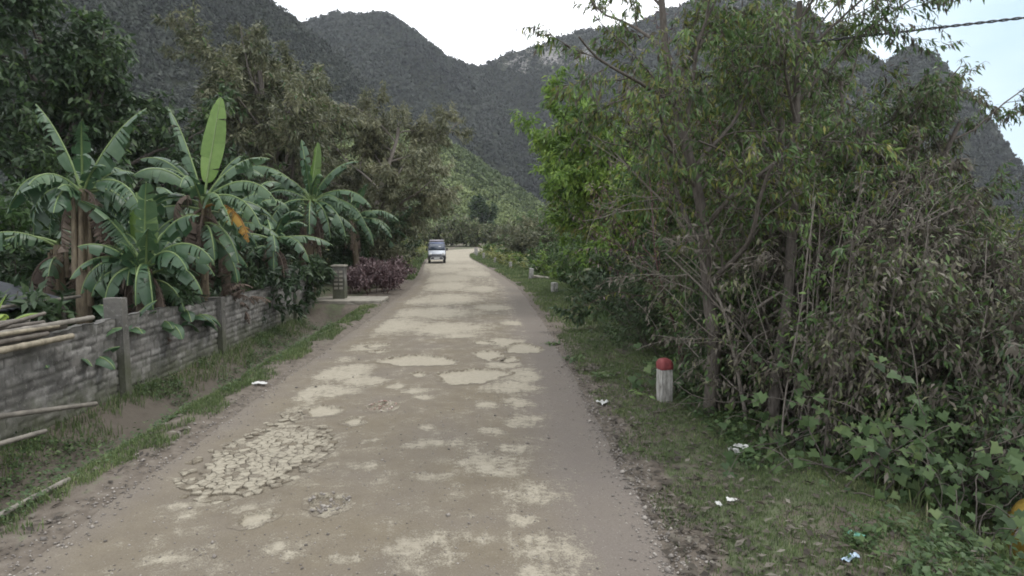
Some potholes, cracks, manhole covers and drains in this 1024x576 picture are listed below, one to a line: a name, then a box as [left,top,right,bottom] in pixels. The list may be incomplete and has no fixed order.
pothole [502,342,545,354]
pothole [301,491,356,518]
crack [172,406,340,504]
pothole [432,367,516,386]
pothole [361,400,401,413]
pothole [371,353,462,367]
